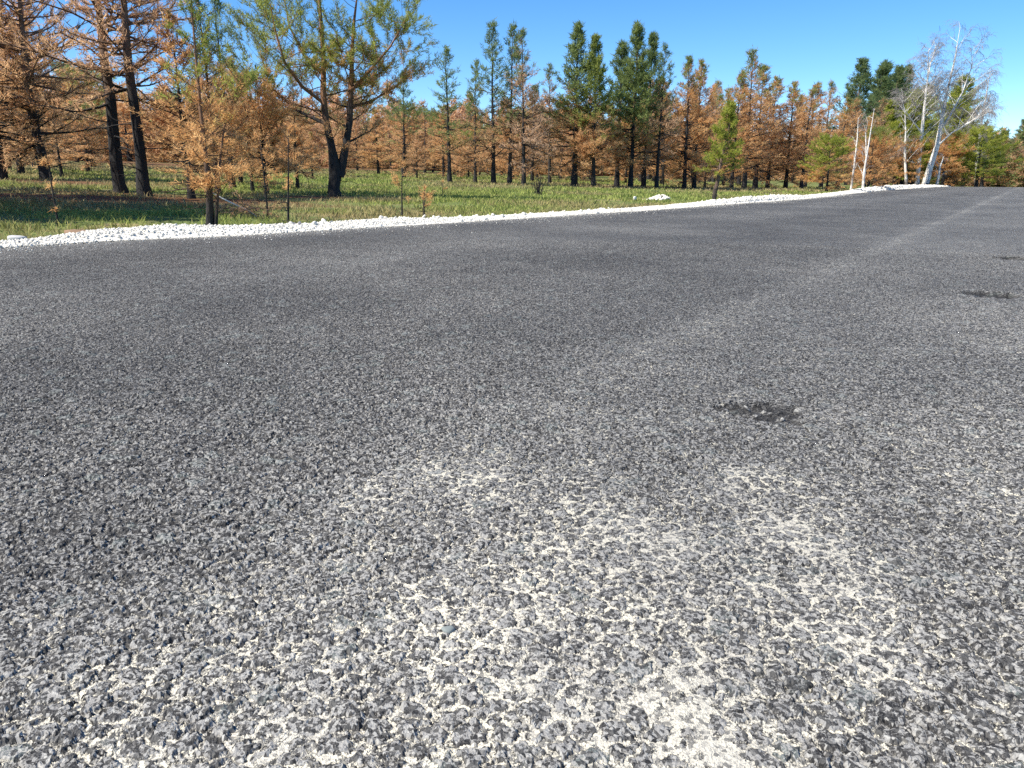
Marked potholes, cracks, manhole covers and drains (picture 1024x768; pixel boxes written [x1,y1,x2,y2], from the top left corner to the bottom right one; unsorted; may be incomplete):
pothole [955,289,1024,299]
pothole [710,399,816,426]
